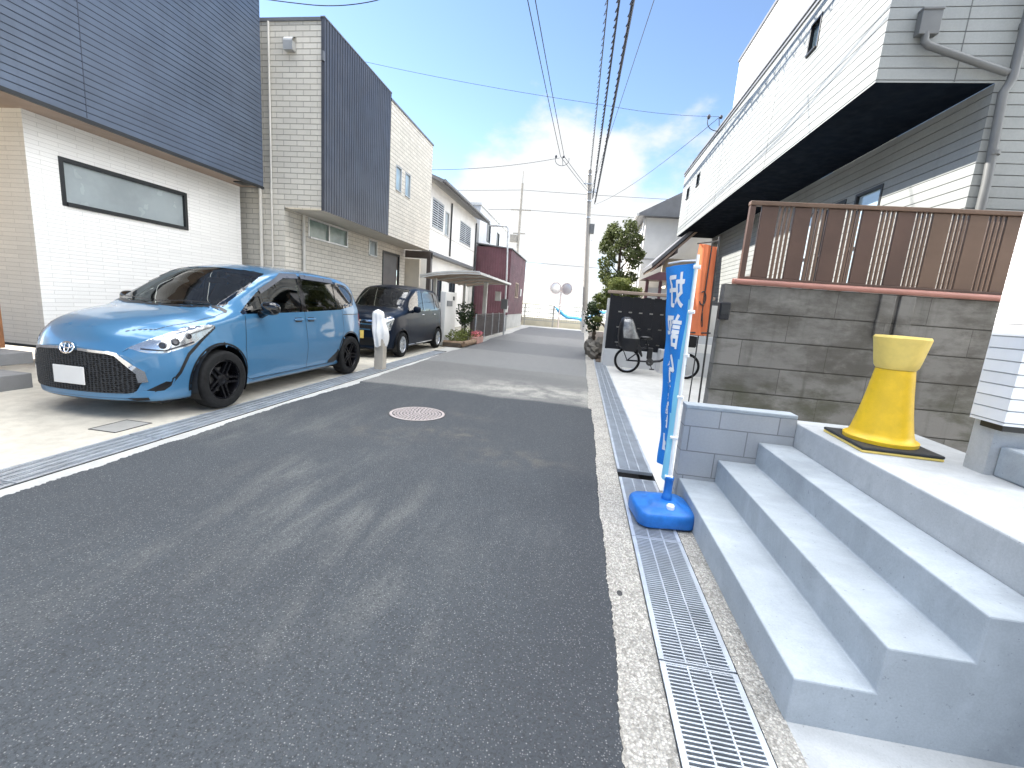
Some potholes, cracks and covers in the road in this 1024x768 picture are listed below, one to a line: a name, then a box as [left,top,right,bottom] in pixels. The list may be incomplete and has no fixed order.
manhole cover [388,406,446,421]
drain grate [619,477,681,543]
drain grate [659,660,777,768]
drain grate [632,536,736,674]
utility cover [88,420,152,433]
